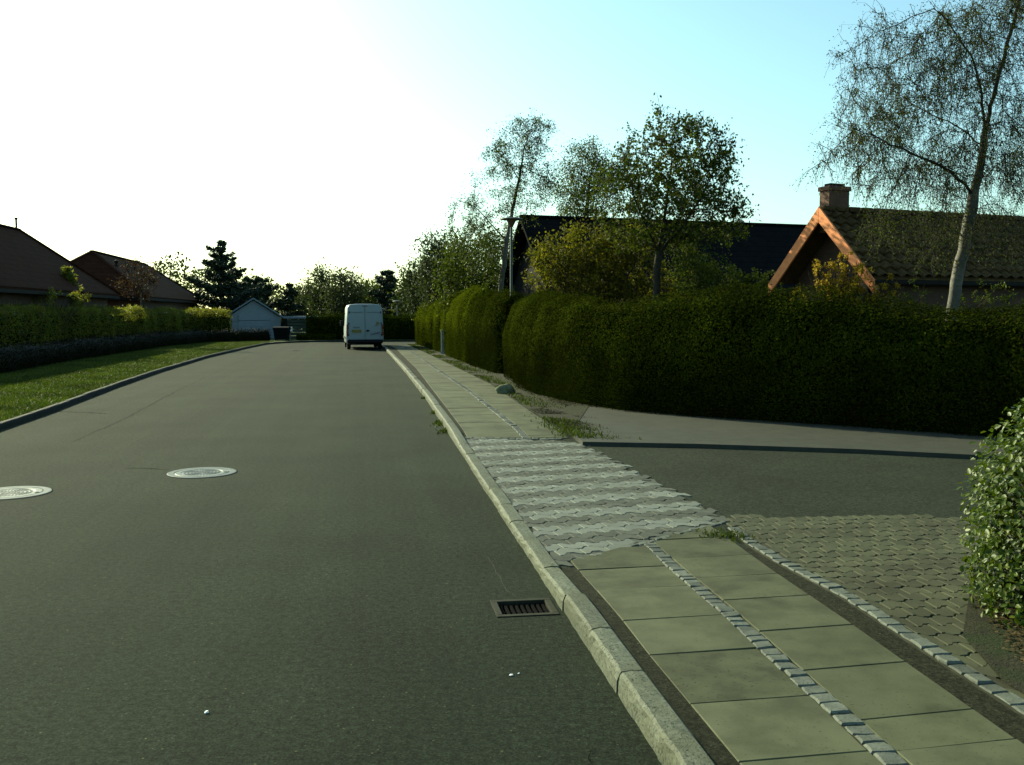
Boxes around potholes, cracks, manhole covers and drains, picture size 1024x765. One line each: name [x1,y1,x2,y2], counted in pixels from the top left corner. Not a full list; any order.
manhole cover [0,486,53,500]
drain grate [490,598,560,618]
manhole cover [166,467,237,478]
